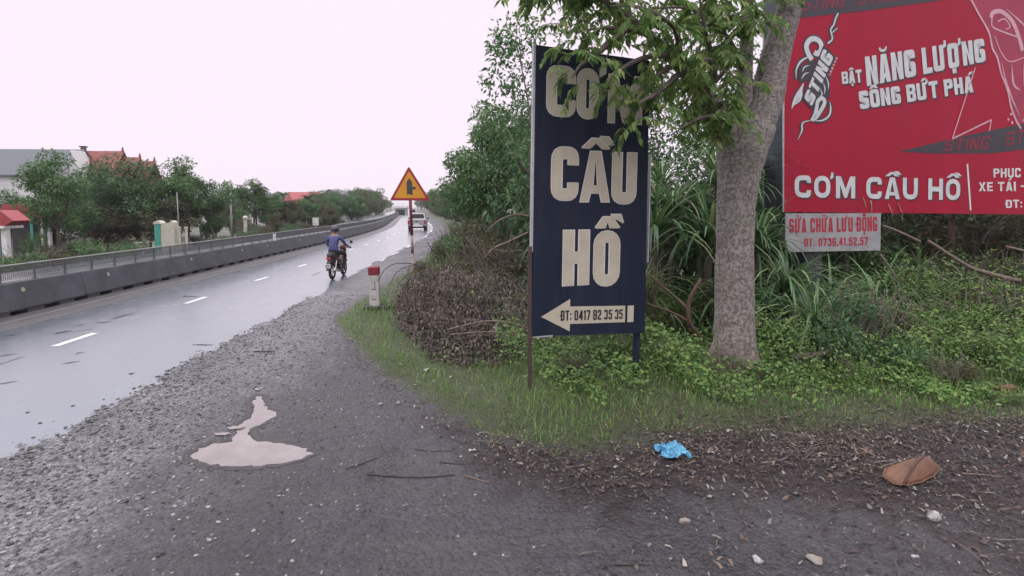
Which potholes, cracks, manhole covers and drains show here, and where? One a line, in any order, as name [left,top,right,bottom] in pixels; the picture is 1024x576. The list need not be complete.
pothole [182,393,321,470]
